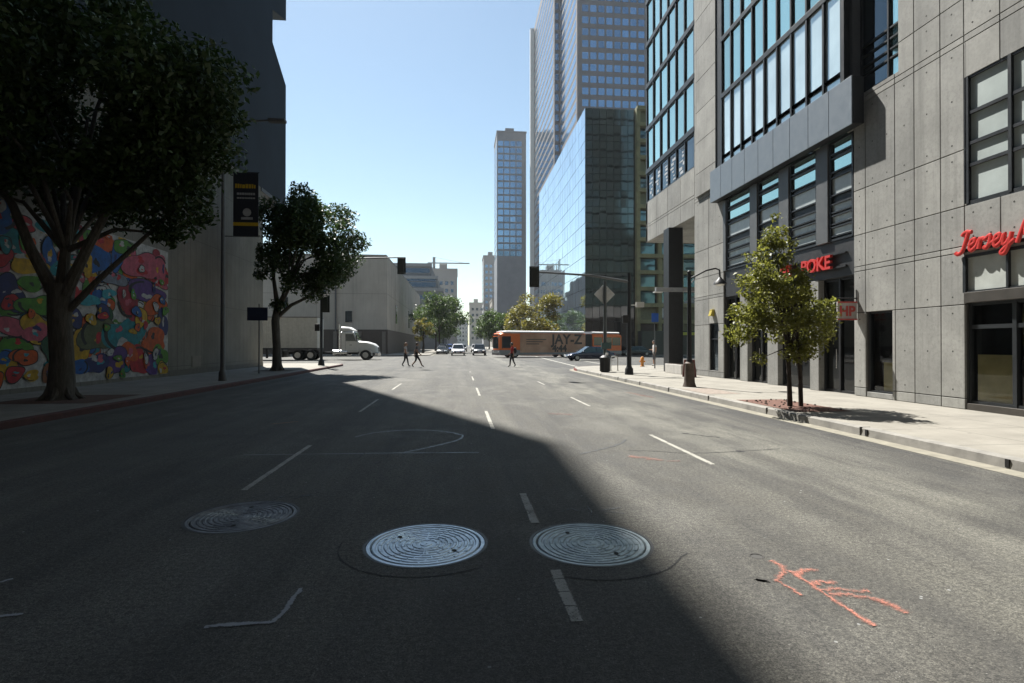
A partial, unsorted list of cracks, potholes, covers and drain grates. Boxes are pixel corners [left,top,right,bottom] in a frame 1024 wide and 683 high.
manhole cover [529,522,654,567]
manhole cover [362,523,488,568]
manhole cover [181,500,300,534]
